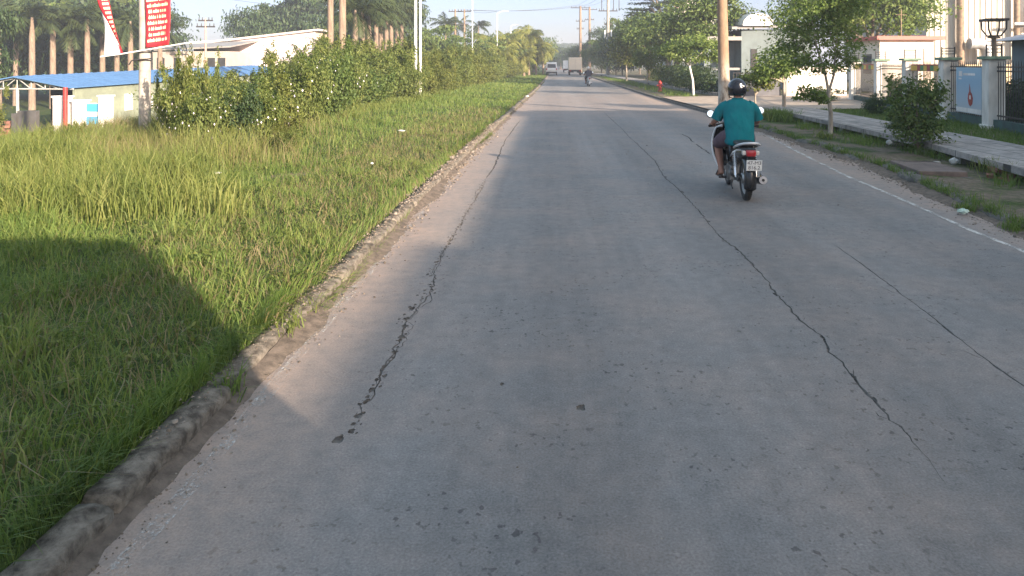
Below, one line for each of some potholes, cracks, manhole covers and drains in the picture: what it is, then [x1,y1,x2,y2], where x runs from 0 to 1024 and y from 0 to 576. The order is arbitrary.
crack [608,116,1024,484]
